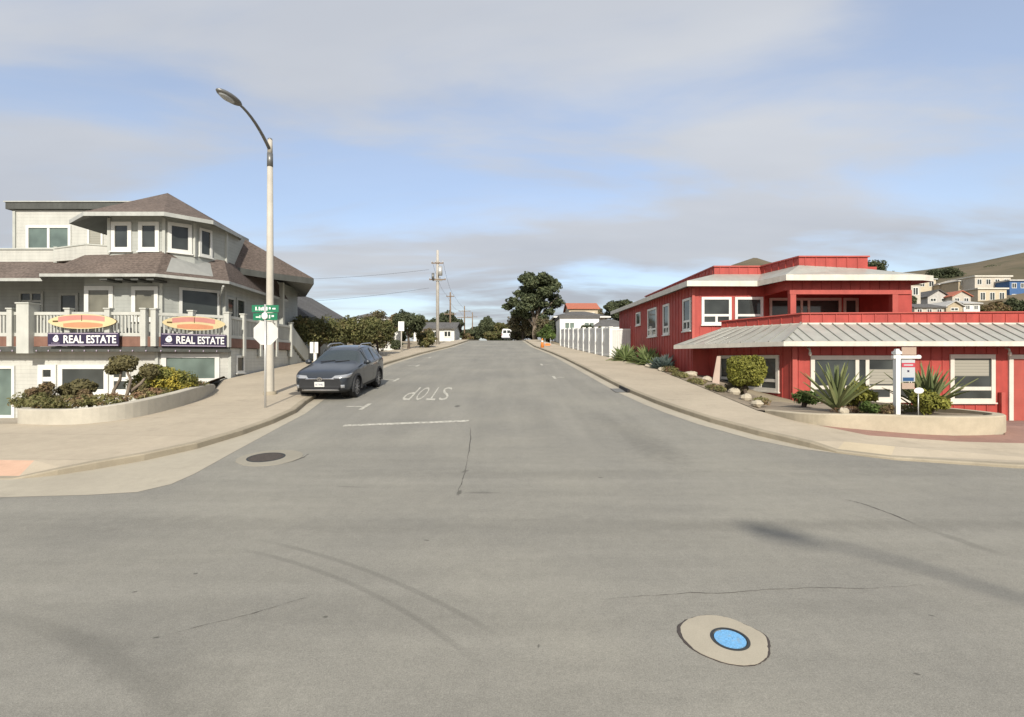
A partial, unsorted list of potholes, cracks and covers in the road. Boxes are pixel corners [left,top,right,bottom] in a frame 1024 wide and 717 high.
manhole cover [677,615,771,667]
manhole cover [236,450,303,466]
crack [611,585,911,599]
